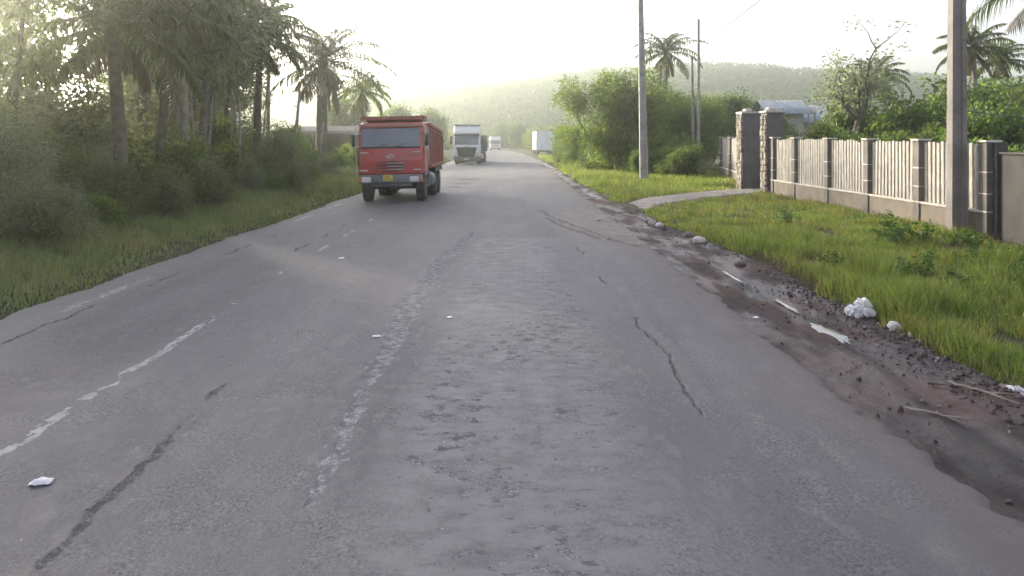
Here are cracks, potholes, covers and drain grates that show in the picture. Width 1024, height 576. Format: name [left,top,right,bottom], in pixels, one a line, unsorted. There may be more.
crack [398,238,678,576]
crack [0,234,277,345]
crack [32,383,227,571]
crack [575,246,703,416]
